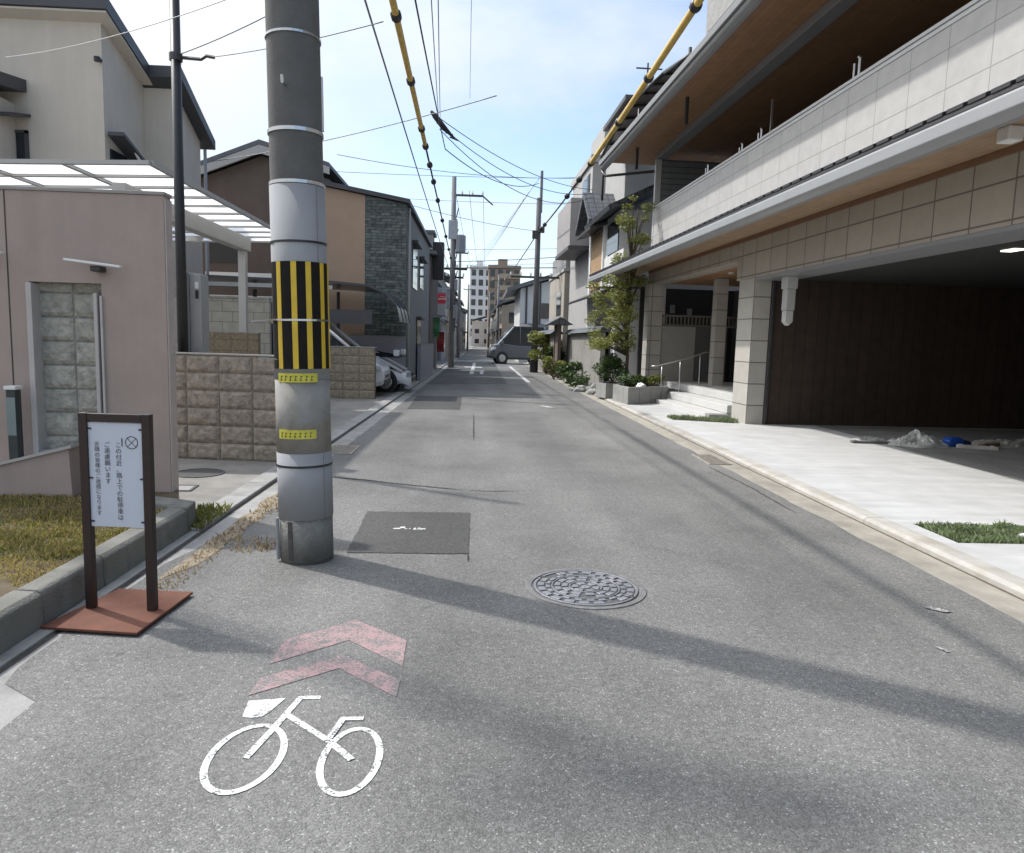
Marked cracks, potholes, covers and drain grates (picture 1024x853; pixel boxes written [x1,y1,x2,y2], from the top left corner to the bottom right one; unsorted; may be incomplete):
manhole cover [179,468,225,478]
drain grate [691,454,732,465]
manhole cover [526,568,646,610]
